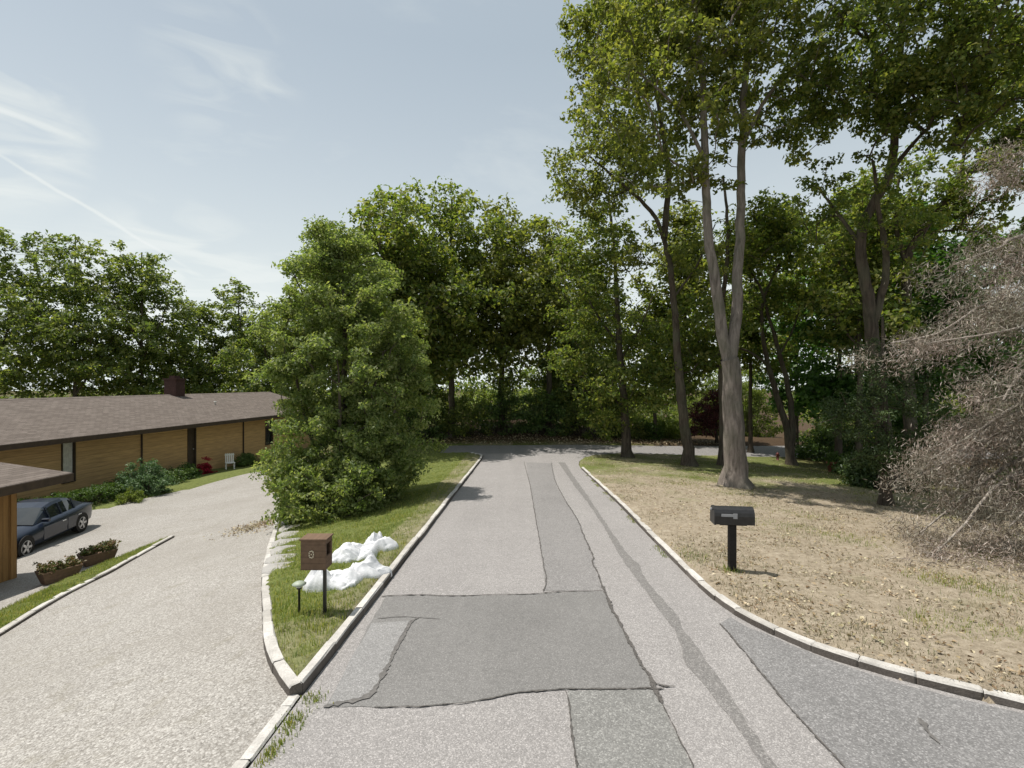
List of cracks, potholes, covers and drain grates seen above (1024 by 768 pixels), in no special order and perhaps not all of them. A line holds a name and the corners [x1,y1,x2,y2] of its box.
crack [918,718,940,743]
